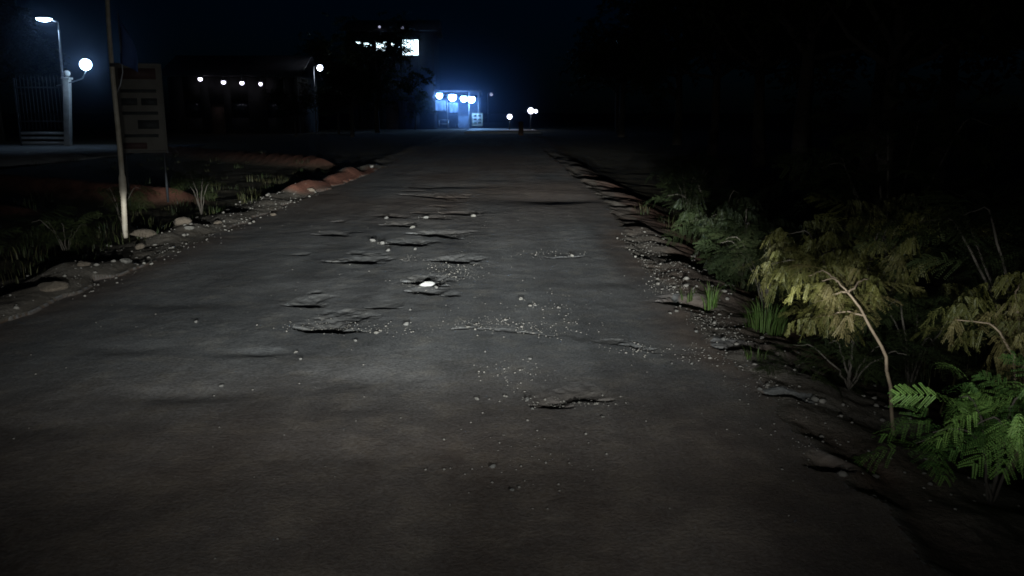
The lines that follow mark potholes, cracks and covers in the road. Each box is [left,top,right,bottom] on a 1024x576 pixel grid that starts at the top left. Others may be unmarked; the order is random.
pothole [279,294,341,309]
pothole [401,227,484,239]
pothole [288,306,391,334]
pothole [424,252,491,265]
pothole [319,250,406,265]
pothole [379,237,446,247]
pothole [307,229,364,237]
pothole [430,208,498,216]
pothole [400,272,472,287]
crack [451,327,663,354]
pothole [403,286,455,296]
pothole [546,380,615,406]
